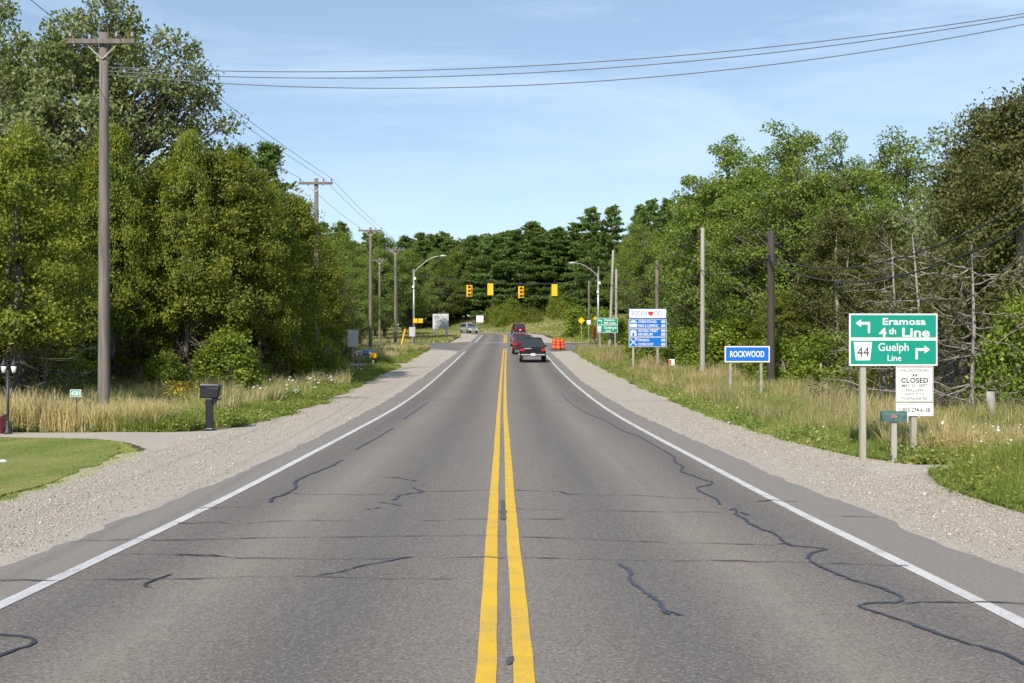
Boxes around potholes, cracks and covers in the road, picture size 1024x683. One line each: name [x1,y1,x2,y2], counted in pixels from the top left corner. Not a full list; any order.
crack [520,490,721,519]
crack [10,506,505,581]
